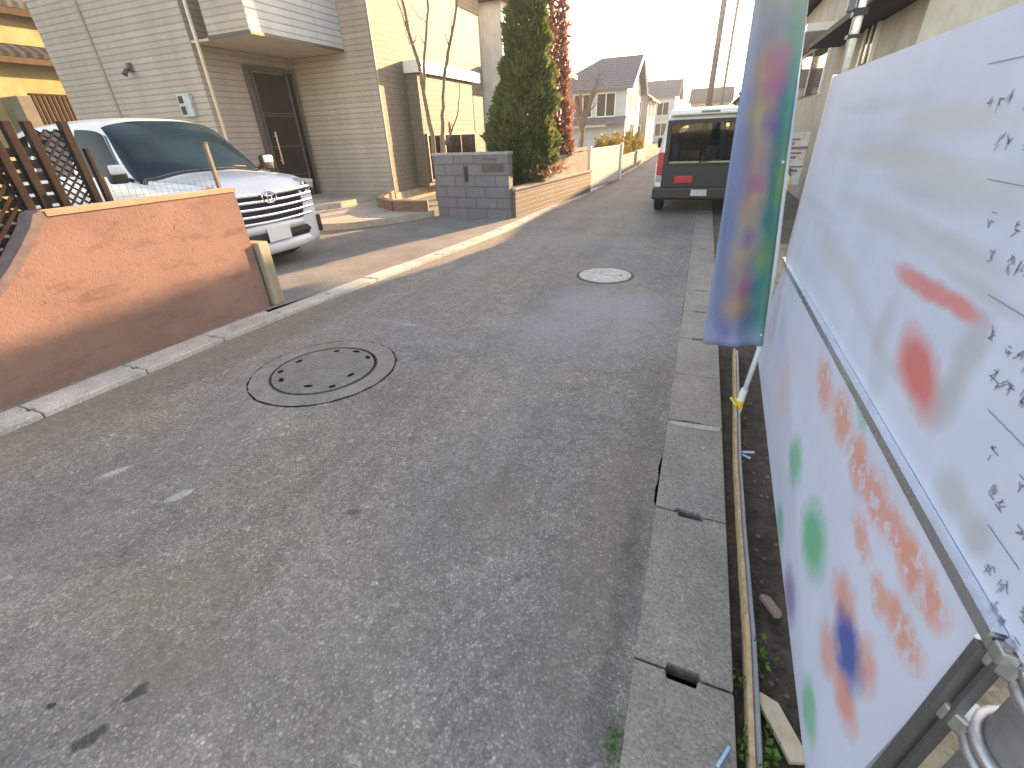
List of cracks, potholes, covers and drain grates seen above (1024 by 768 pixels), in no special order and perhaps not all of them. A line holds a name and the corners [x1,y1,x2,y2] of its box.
manhole cover [246,341,397,407]
crack [654,460,662,506]
manhole cover [576,267,634,284]
